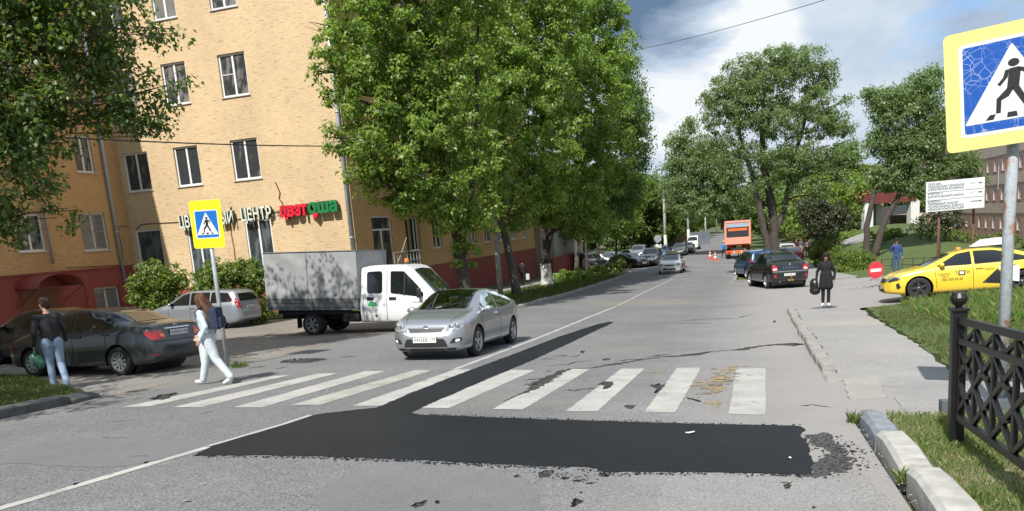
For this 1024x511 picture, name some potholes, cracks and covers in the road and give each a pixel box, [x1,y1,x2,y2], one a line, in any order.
pothole [150,392,178,400]
